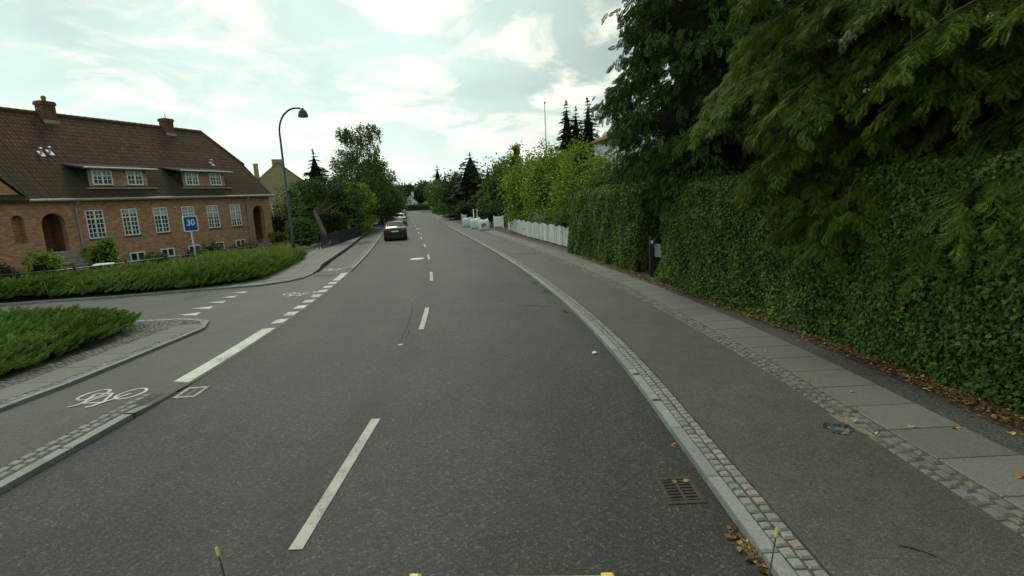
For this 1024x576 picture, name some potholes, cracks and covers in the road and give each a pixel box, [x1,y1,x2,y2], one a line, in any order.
drain grate [655,476,707,505]
